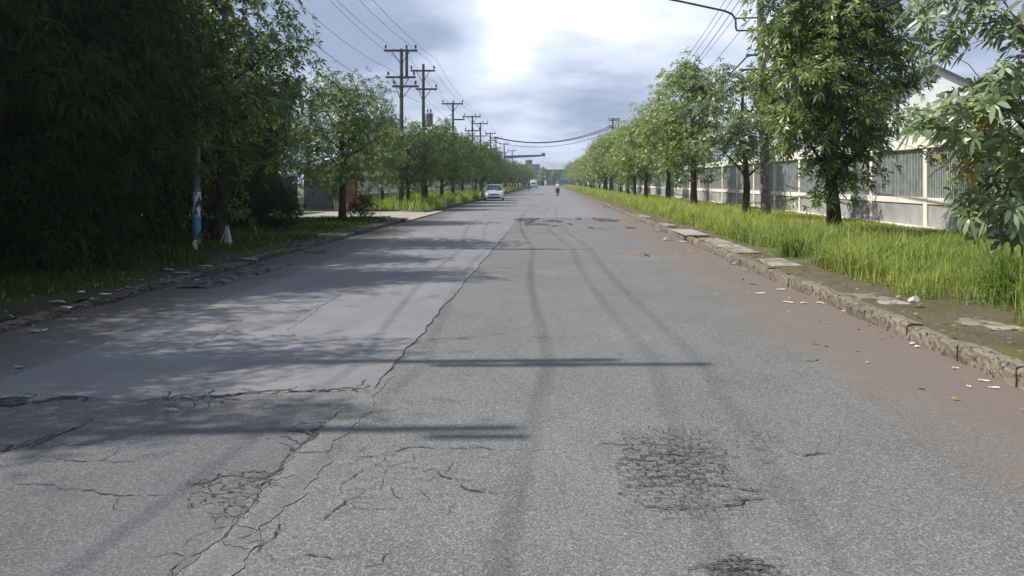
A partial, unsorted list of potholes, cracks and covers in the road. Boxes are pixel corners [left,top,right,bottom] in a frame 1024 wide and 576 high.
crack [141,380,370,412]
crack [322,440,544,521]
crack [153,411,423,576]
crack [0,392,164,464]
